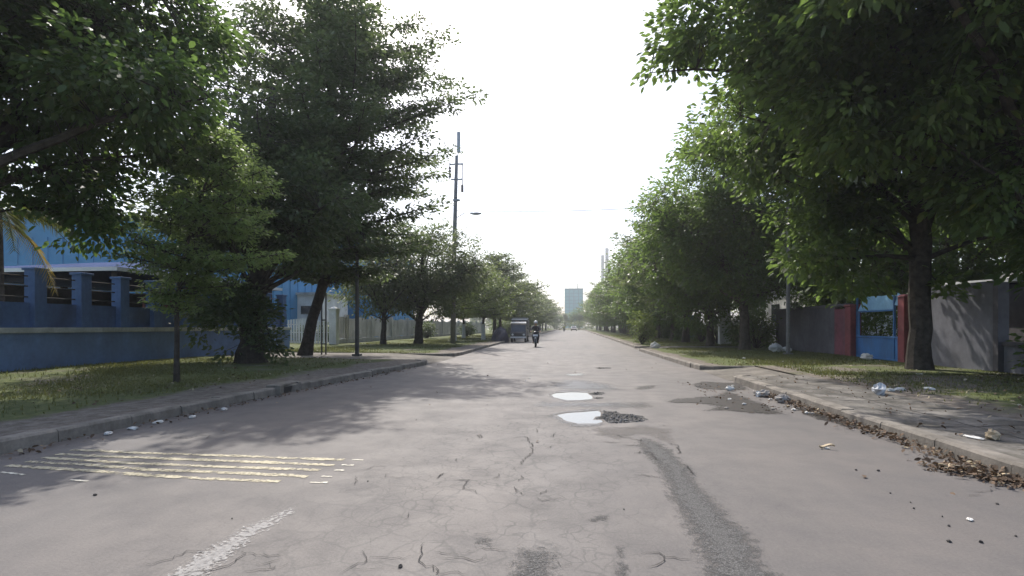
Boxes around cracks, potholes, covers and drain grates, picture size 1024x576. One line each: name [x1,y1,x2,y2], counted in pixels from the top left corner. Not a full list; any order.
crack [466,425,568,521]
crack [327,533,522,574]
crack [604,425,695,477]
